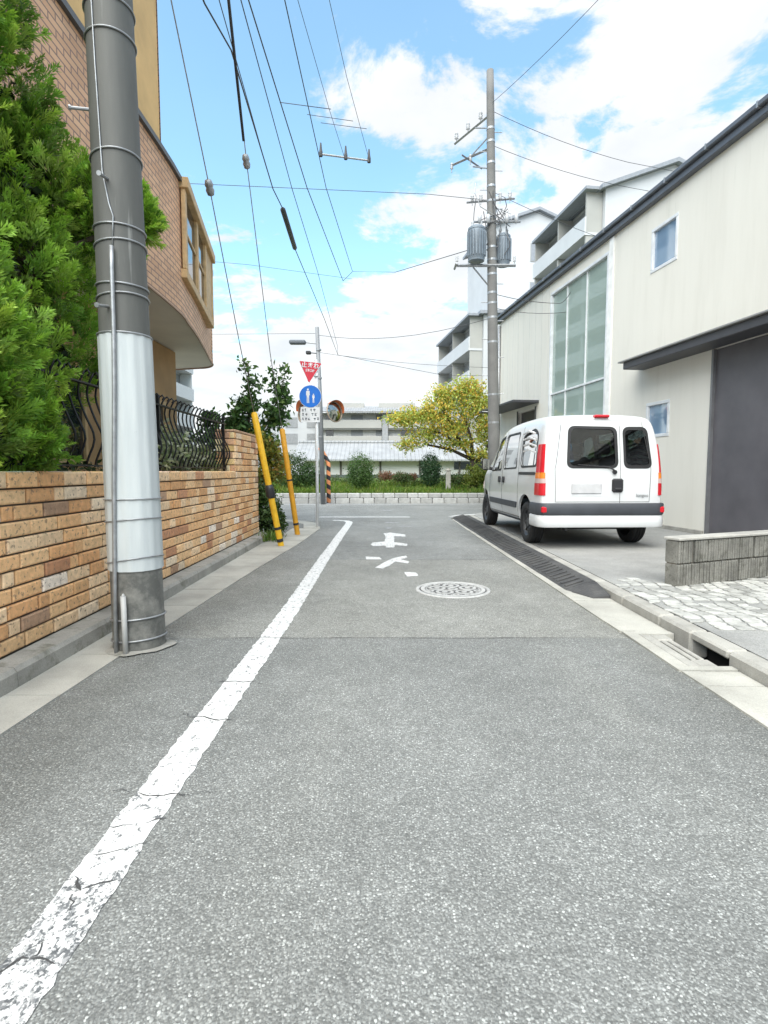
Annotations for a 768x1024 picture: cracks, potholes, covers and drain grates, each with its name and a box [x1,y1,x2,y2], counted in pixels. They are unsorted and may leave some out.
drain grate [622,625,751,673]
crack [69,876,117,908]
crack [100,816,169,854]
manhole cover [416,581,491,598]
crack [0,943,55,972]
